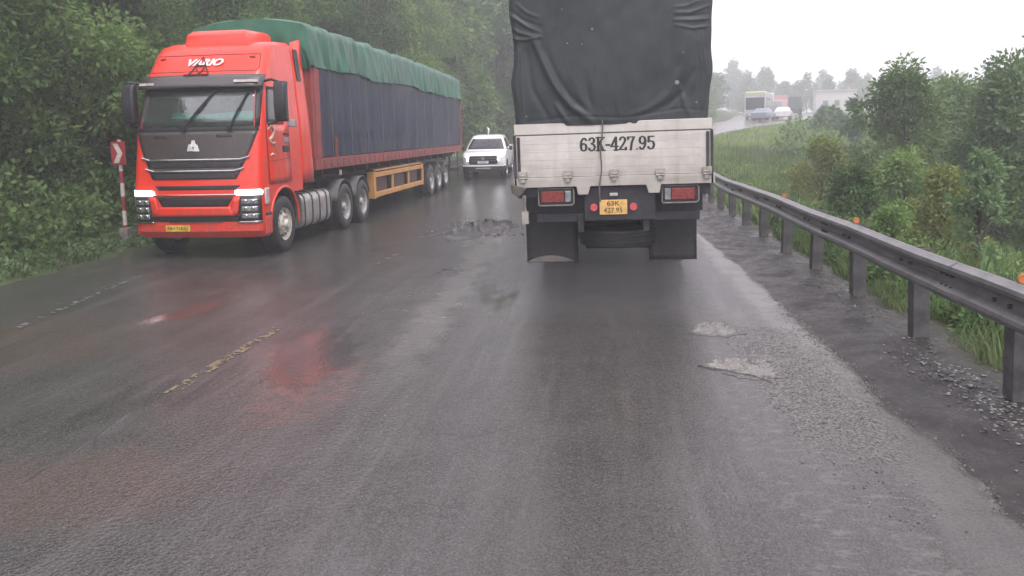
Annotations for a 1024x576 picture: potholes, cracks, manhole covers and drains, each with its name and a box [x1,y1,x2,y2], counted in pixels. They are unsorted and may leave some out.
pothole [700,355,790,380]
pothole [687,321,749,337]
pothole [442,218,517,241]
